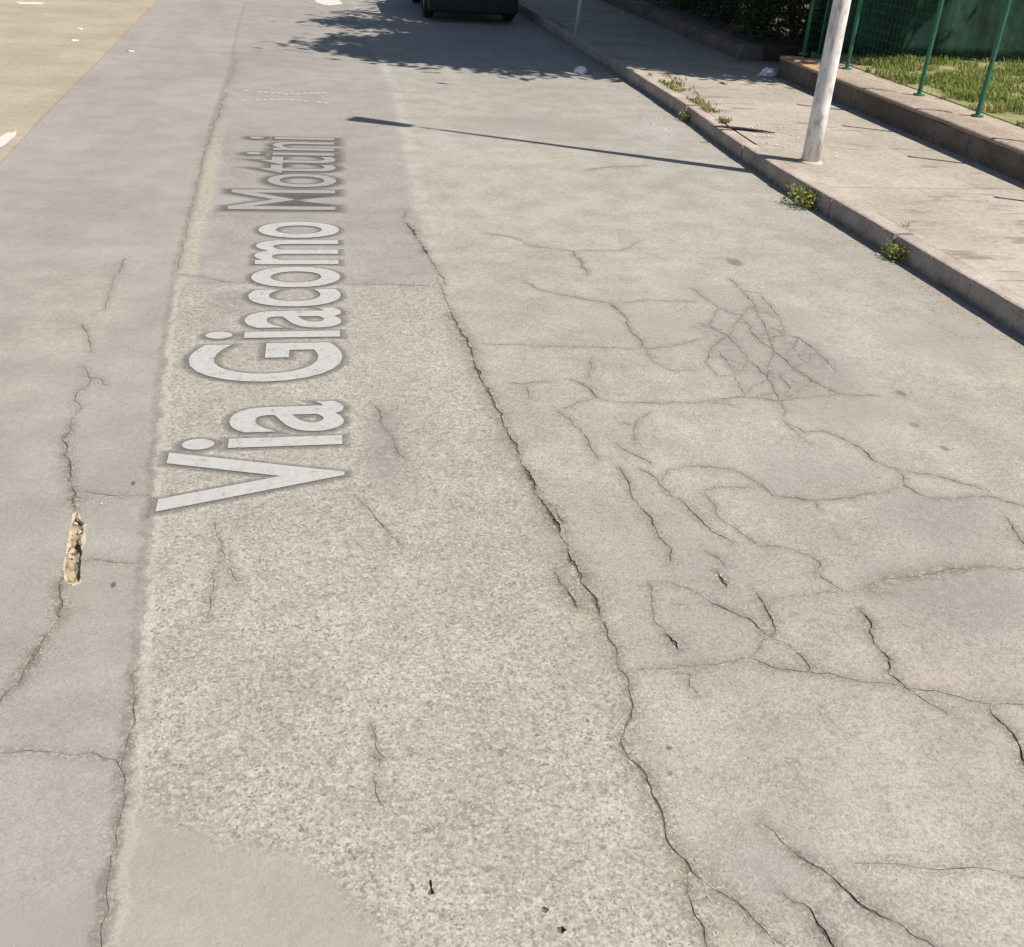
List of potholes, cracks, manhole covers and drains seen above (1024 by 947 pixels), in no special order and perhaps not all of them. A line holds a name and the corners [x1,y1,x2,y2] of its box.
crack [0,578,63,701]
crack [498,280,1024,602]
crack [369,723,385,808]
crack [11,675,136,947]
crack [207,527,237,617]
crack [643,584,987,714]
crack [990,703,1024,766]
crack [764,825,1024,947]
crack [61,324,149,510]
pothole [51,501,103,586]
crack [492,234,639,275]
